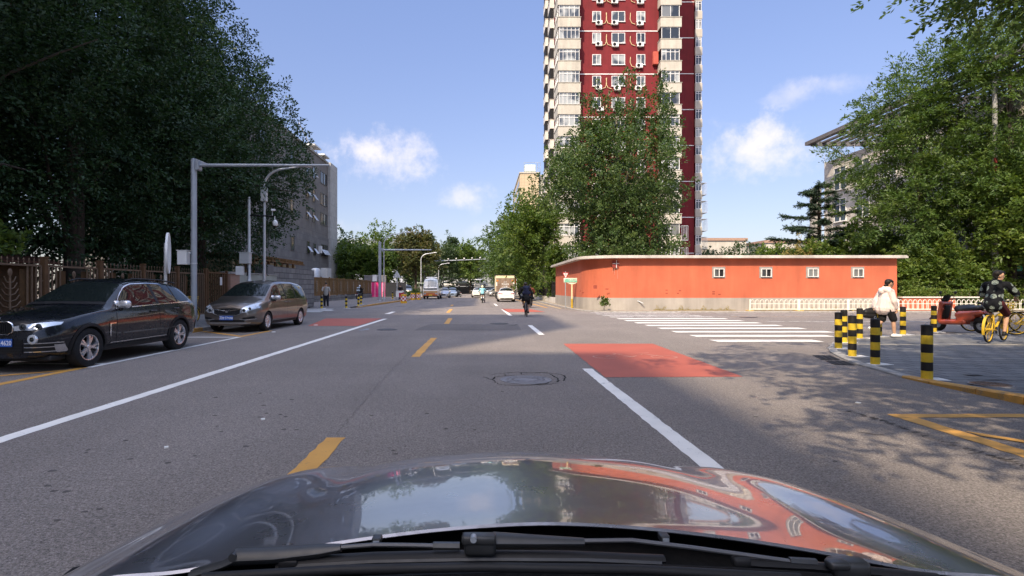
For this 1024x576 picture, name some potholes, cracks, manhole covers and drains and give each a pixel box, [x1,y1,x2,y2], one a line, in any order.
manhole cover [500,375,552,384]
crack [336,349,410,434]
